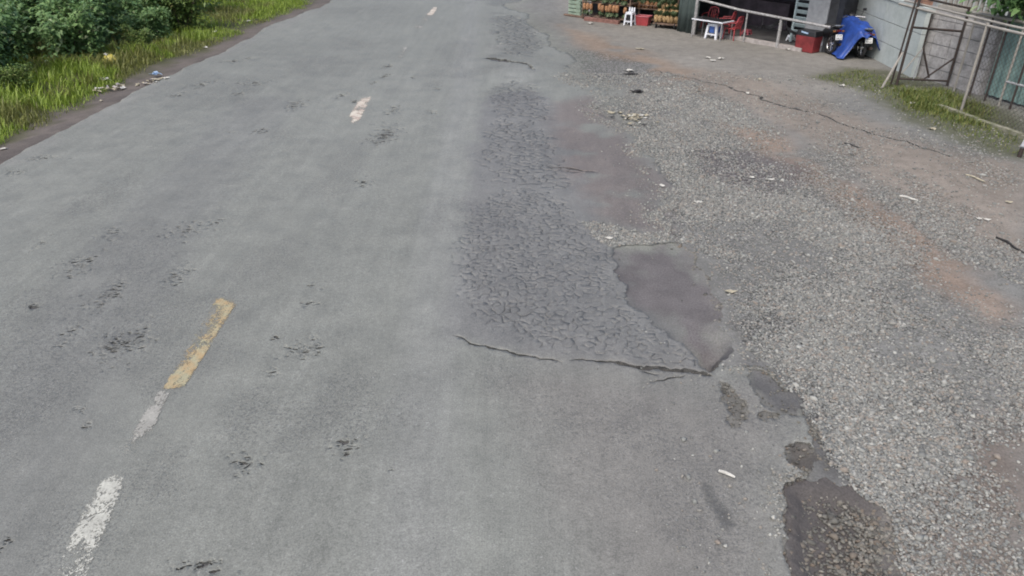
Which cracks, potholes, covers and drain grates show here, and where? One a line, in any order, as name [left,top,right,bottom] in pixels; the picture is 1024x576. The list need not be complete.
pothole [783,477,902,576]
pothole [748,369,802,416]
crack [660,71,950,157]
crack [485,123,594,186]
pothole [720,382,749,428]
crack [458,336,707,382]
pothole [785,442,818,473]
